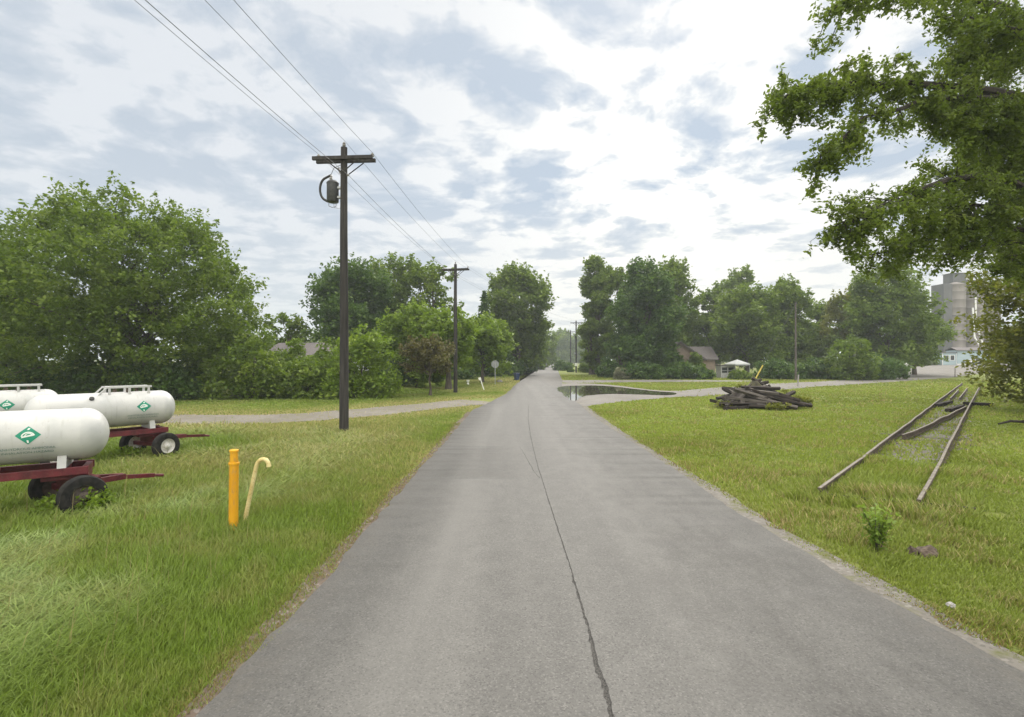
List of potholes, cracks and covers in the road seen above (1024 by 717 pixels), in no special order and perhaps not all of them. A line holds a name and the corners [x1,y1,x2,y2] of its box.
crack [524,406,615,717]
